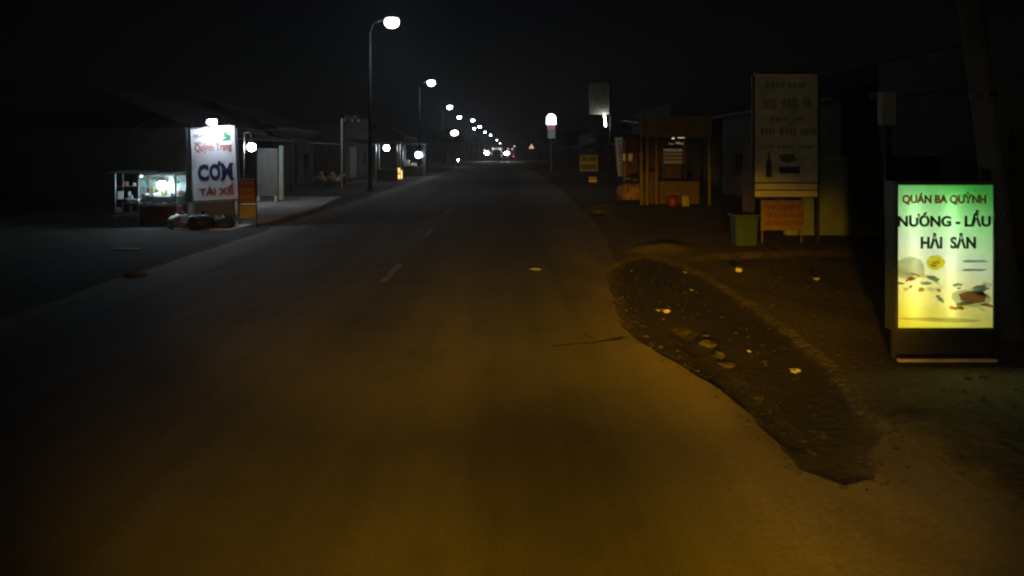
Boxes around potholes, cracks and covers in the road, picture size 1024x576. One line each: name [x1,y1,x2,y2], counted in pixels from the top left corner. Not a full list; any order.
crack [552,332,625,346]
pothole [607,254,884,486]
